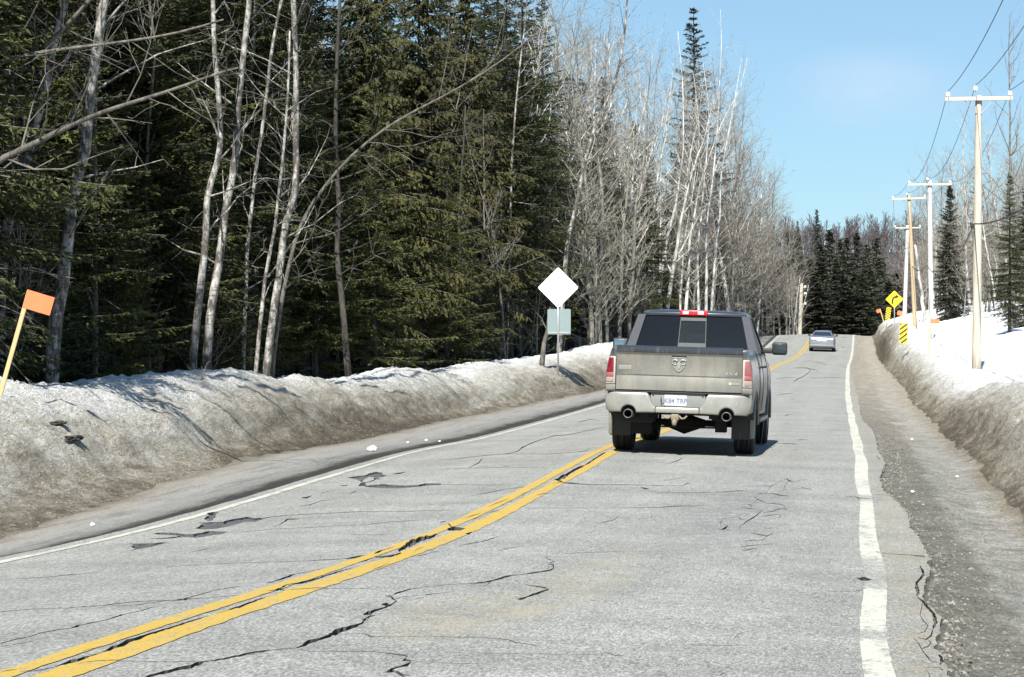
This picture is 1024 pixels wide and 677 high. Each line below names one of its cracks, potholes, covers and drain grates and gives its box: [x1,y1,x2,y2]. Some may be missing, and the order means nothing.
pothole [150,531,226,539]
crack [0,419,812,677]
pothole [196,512,262,529]
pothole [349,472,386,485]
pothole [129,542,167,551]
crack [885,553,943,676]
